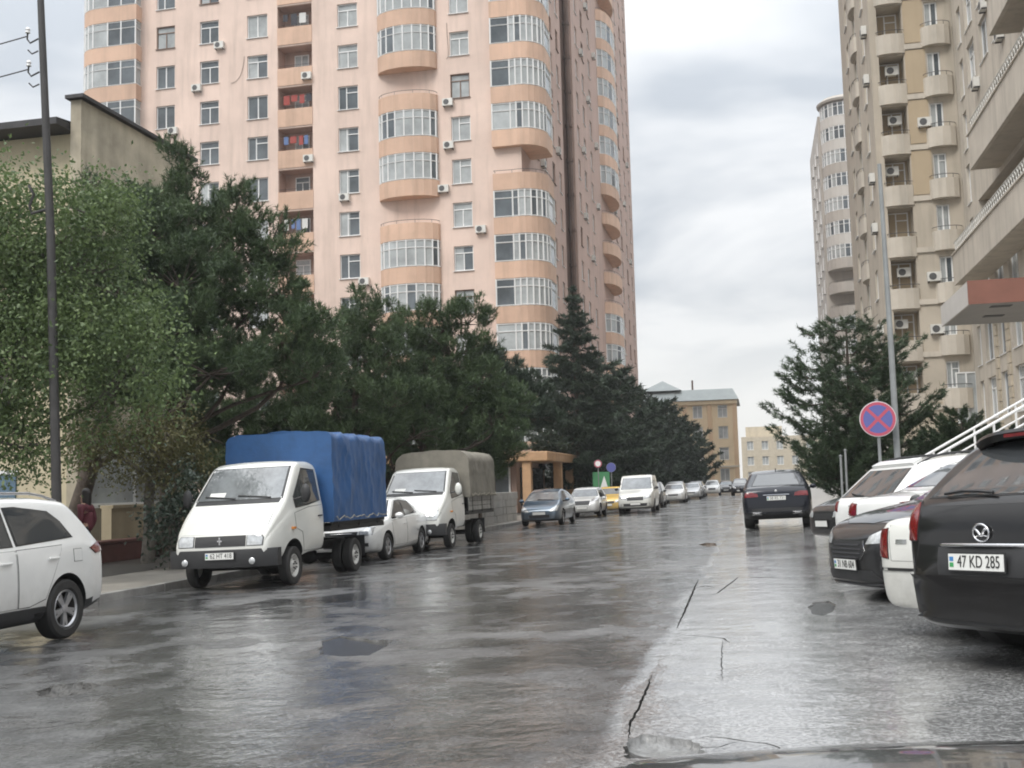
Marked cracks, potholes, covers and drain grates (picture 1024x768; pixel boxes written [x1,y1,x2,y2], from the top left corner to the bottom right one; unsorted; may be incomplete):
crack [676,634,730,680]
pothole [623,734,706,759]
pothole [37,682,102,697]
crack [628,677,652,739]
pothole [318,636,393,657]
pothole [808,601,836,616]
